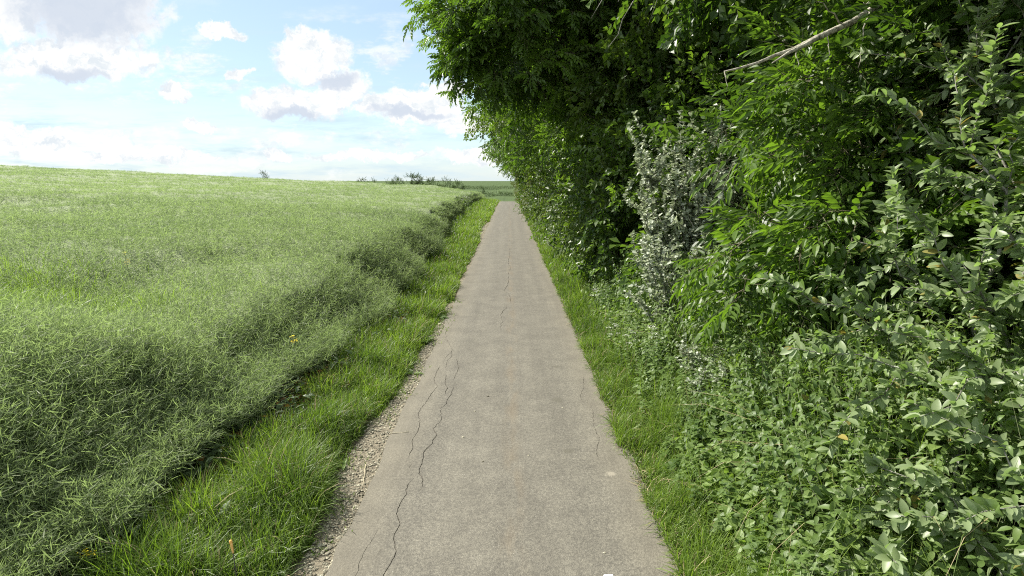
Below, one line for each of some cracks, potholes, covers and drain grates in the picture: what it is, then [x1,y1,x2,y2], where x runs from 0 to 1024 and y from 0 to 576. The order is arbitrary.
crack [355,330,463,576]
